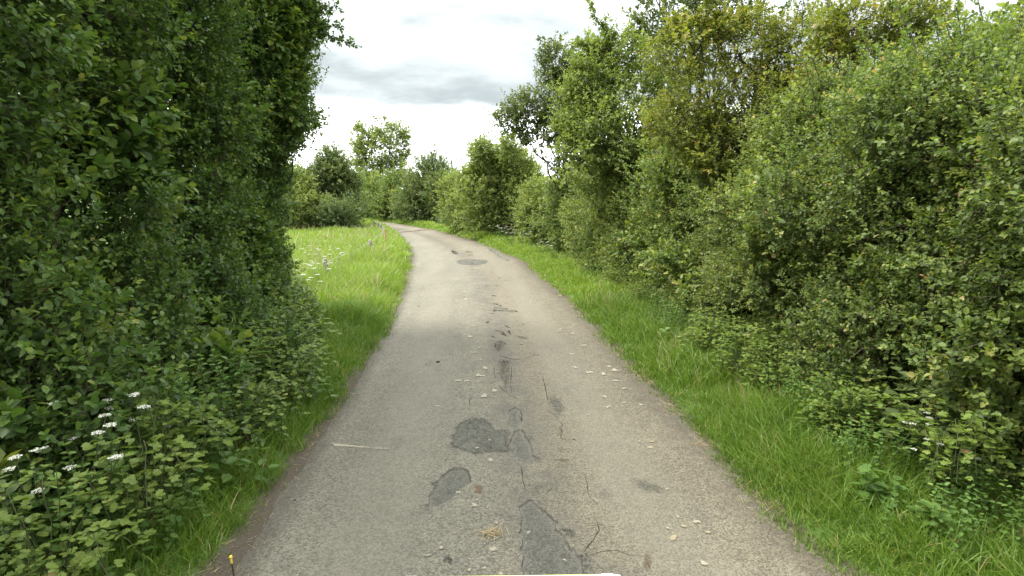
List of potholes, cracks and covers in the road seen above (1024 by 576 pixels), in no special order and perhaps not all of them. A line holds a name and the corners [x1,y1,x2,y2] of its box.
crack [579,471,651,570]
